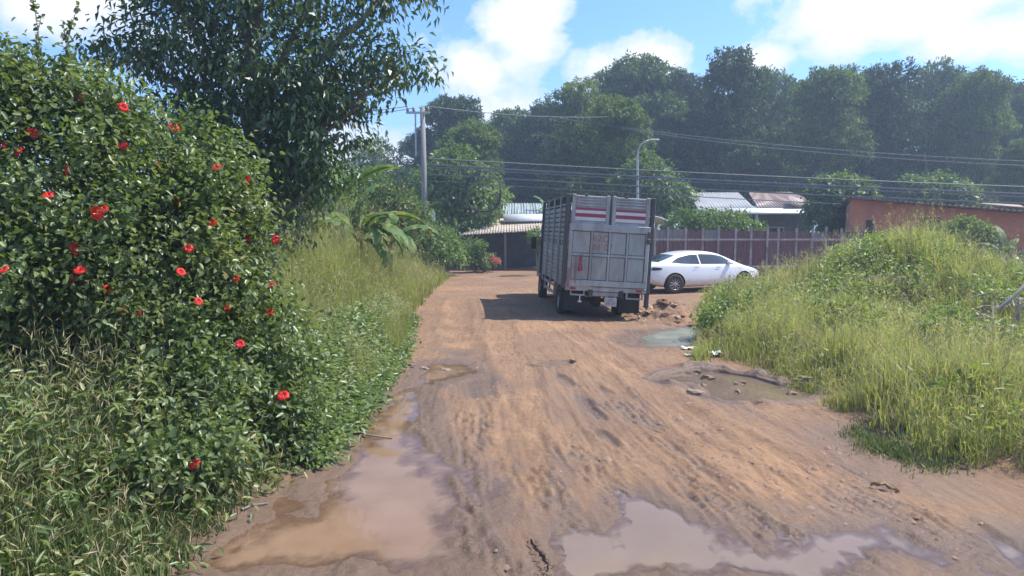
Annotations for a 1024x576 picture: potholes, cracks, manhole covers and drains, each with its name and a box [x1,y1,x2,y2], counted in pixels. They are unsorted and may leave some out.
pothole [642,361,828,405]
